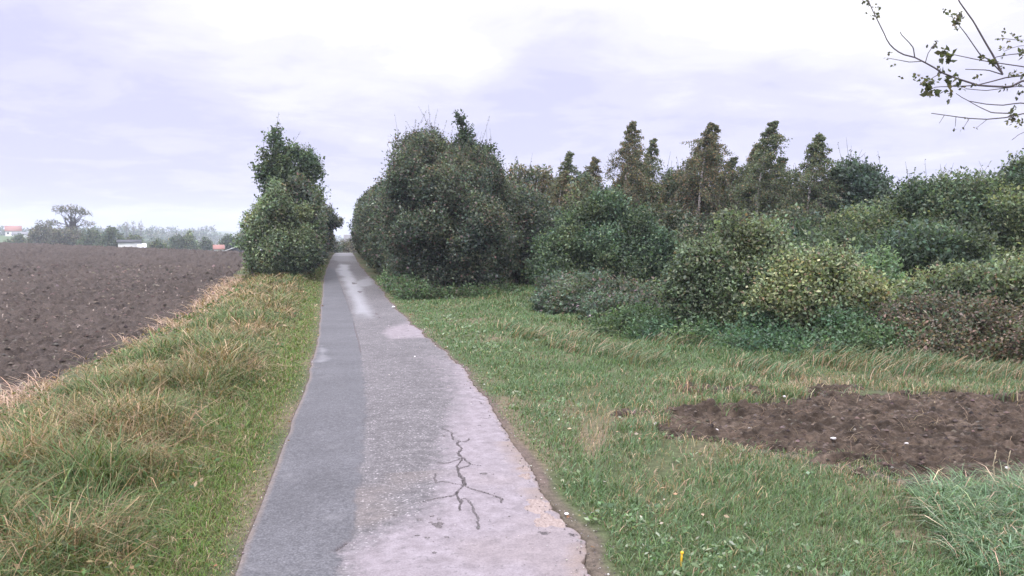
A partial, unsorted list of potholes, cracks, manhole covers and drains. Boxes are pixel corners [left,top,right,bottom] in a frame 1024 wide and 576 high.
crack [424,428,504,530]
